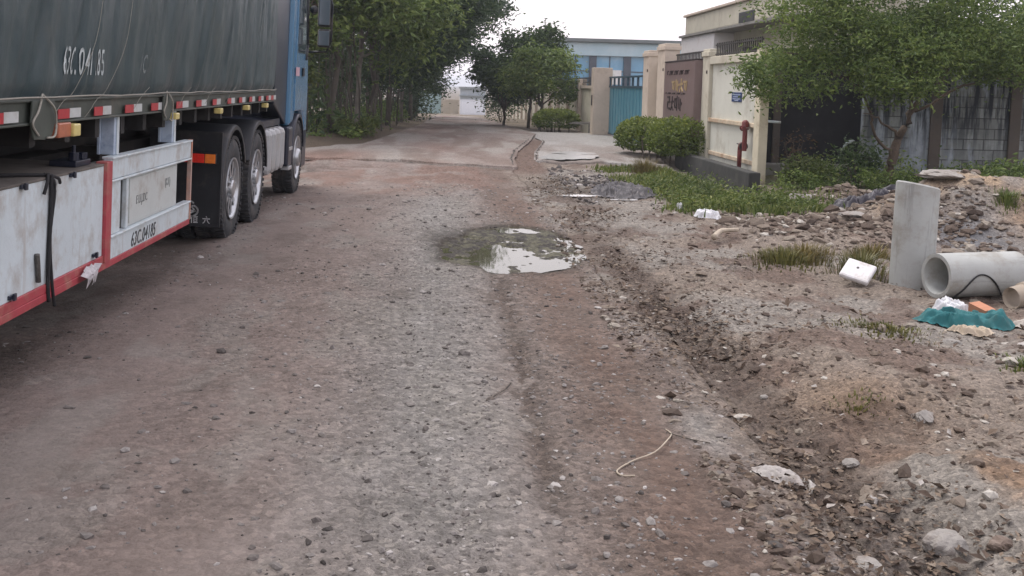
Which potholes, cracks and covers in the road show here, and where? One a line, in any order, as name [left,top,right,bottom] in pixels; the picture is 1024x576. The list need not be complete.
pothole [426,224,589,279]
